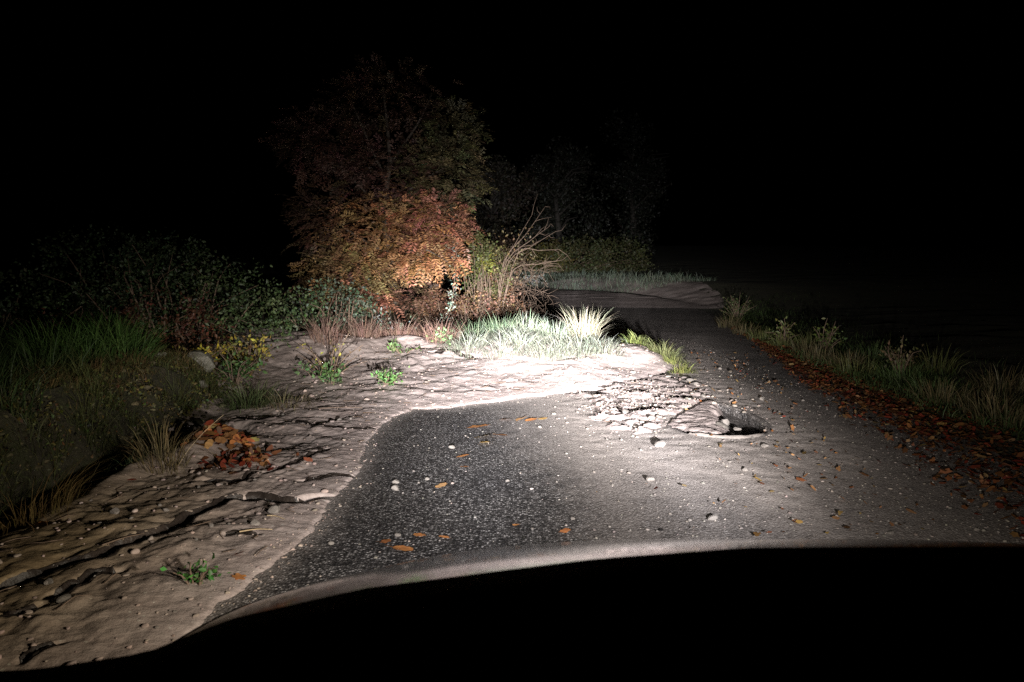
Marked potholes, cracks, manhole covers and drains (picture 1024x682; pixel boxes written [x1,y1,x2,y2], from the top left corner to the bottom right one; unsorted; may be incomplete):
crack [287,420,376,429]
crack [20,641,56,664]
crack [0,449,354,617]
pothole [666,400,774,440]
